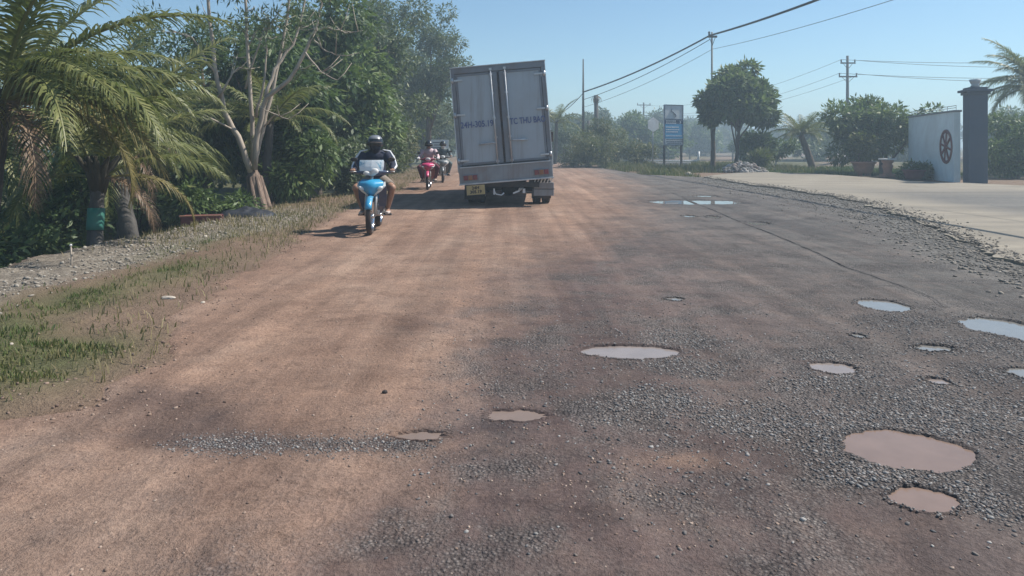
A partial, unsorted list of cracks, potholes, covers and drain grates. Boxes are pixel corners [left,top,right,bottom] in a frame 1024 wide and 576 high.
pothole [949,313,1024,342]
pothole [387,428,452,442]
pothole [919,375,957,386]
pothole [880,477,970,519]
pothole [906,342,966,353]
pothole [848,297,920,314]
pothole [480,406,556,423]
pothole [998,365,1024,379]
pothole [821,423,1001,478]
pothole [564,341,699,361]
pothole [799,358,864,376]
